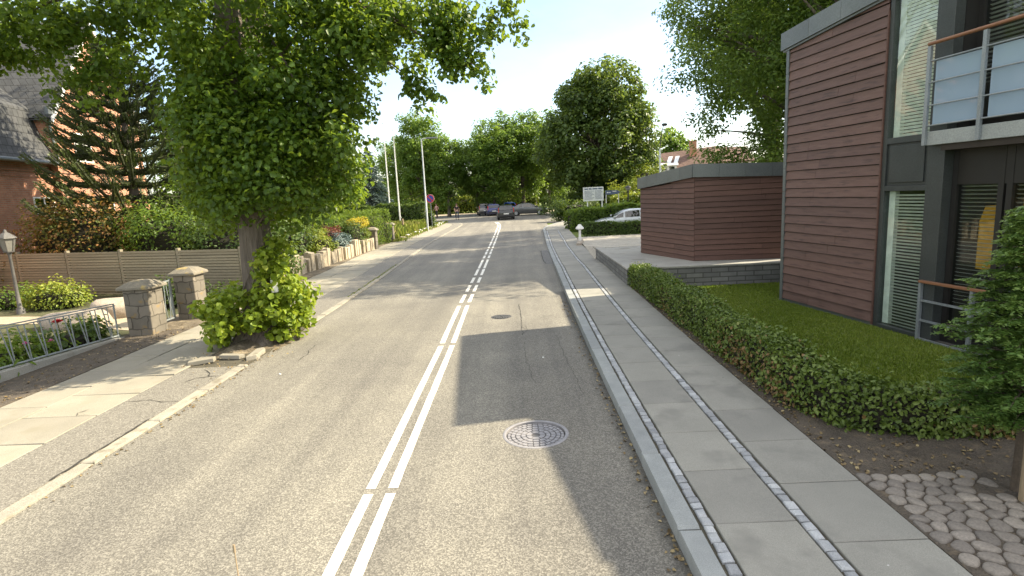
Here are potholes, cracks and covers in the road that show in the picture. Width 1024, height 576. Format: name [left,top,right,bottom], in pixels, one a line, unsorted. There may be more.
manhole cover [503,420,569,449]
